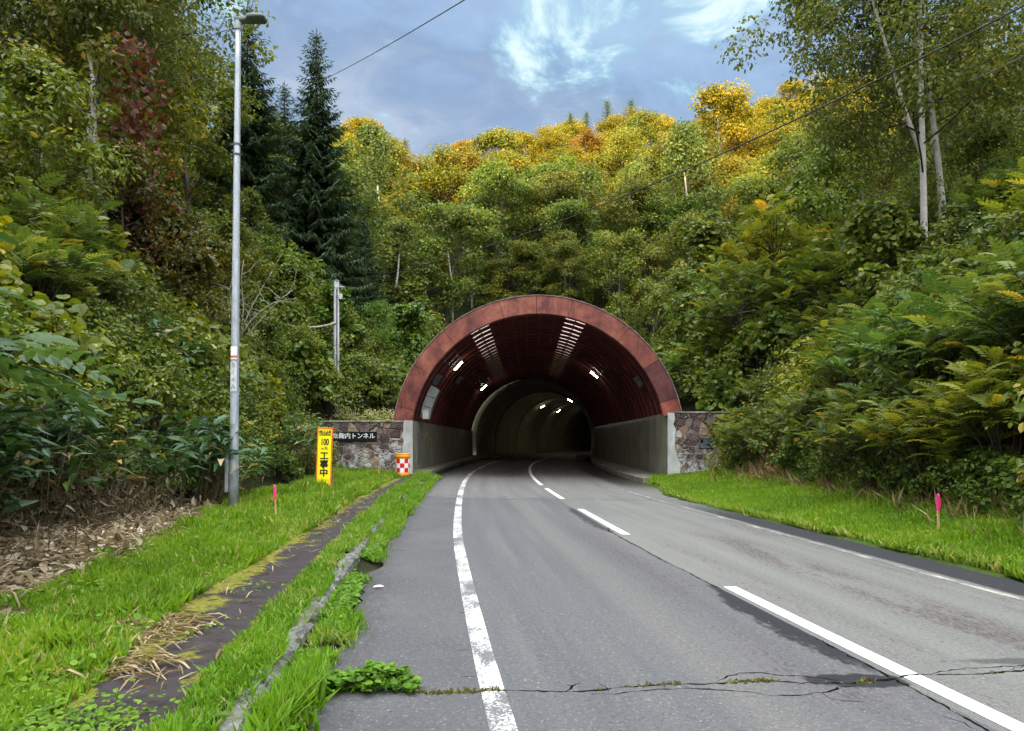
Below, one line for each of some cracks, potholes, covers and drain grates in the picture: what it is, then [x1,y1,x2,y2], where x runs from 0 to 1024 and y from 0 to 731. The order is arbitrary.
crack [414,636,1024,731]
